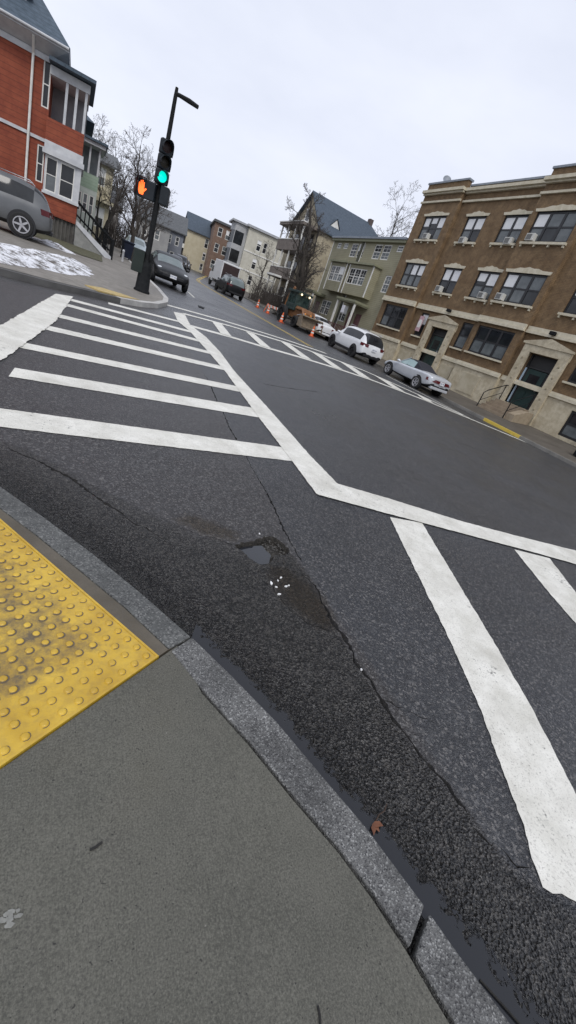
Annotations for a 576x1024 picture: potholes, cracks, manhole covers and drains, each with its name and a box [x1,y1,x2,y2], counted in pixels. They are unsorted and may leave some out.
pothole [235,536,304,578]
